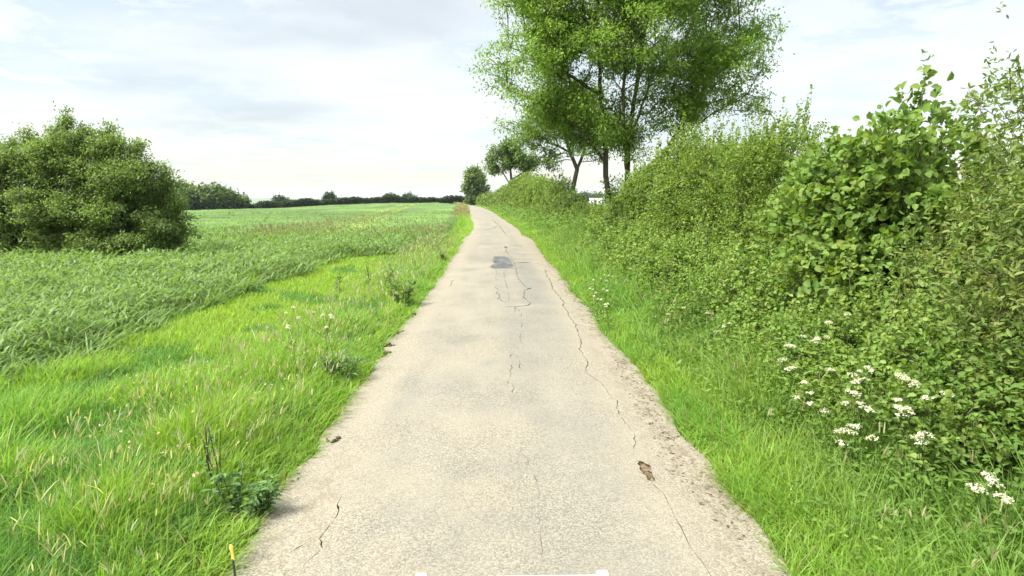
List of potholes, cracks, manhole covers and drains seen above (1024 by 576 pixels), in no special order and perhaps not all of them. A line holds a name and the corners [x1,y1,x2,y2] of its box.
crack [495,249,636,447]
pothole [638,461,655,482]
